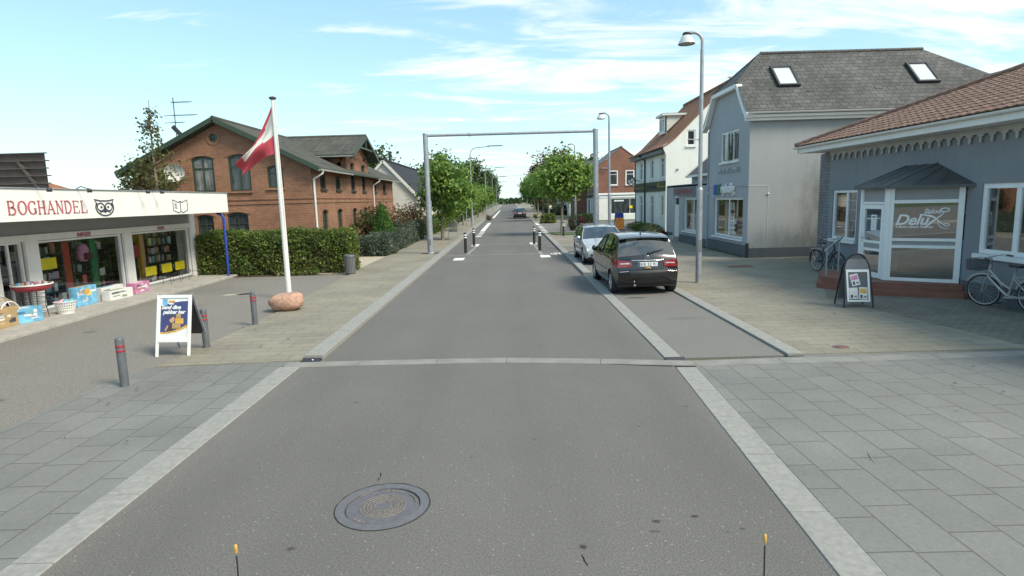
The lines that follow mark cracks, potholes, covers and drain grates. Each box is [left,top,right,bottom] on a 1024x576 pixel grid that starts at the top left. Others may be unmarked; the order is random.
manhole cover [333,483,431,531]
